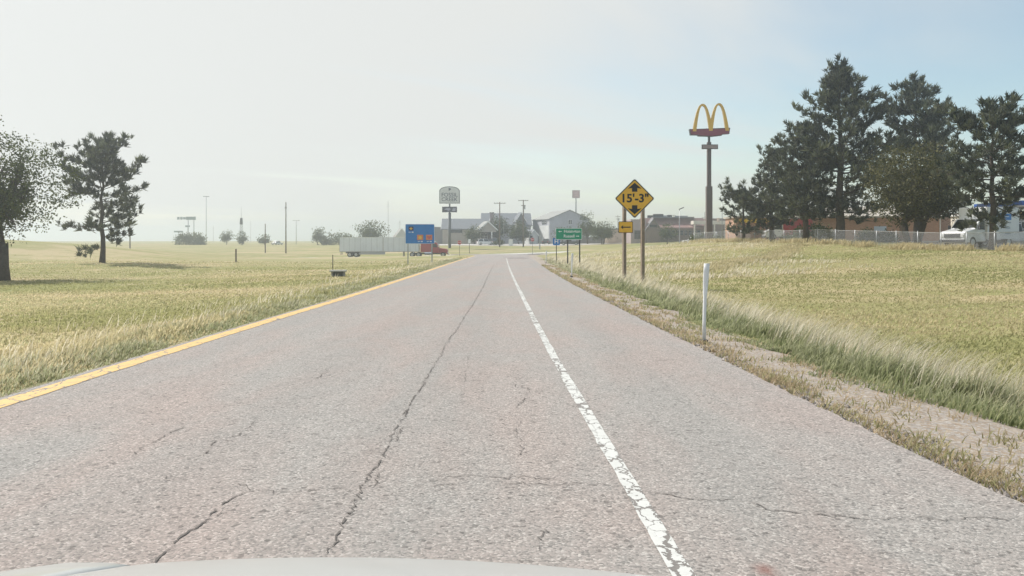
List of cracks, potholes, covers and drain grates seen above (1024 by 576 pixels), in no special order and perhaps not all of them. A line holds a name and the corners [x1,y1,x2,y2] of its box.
crack [651,491,1012,521]
crack [154,474,615,562]
crack [327,273,490,552]
